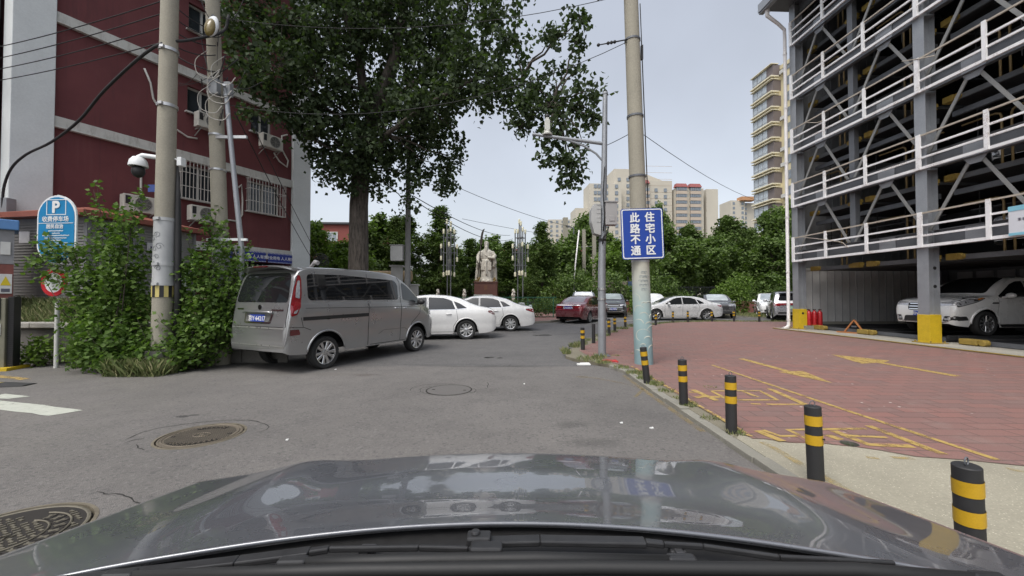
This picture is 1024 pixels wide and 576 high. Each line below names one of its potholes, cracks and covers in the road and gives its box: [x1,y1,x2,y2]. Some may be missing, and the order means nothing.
crack [125,420,269,450]
manhole cover [426,385,472,396]
manhole cover [151,423,247,450]
manhole cover [0,502,99,556]
